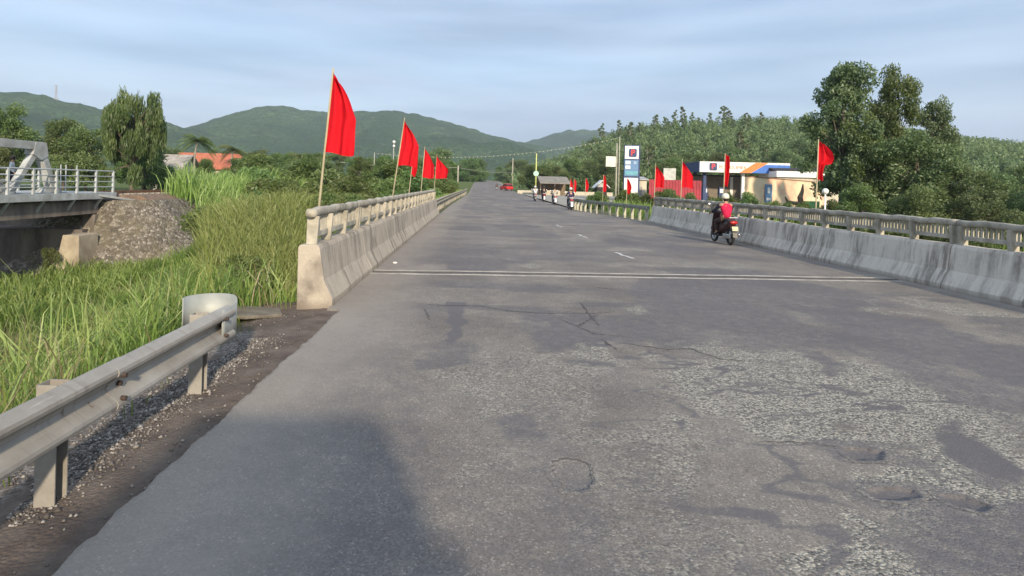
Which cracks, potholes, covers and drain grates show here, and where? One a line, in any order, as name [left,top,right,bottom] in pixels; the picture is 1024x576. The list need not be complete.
pothole [834,444,894,464]
pothole [927,490,1003,517]
pothole [855,482,932,505]
crack [423,286,756,362]
